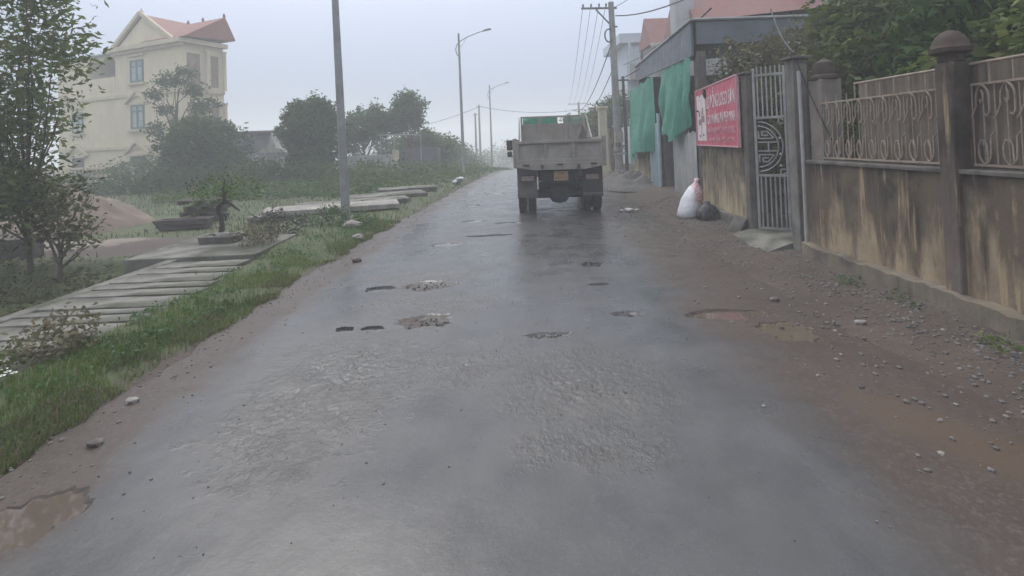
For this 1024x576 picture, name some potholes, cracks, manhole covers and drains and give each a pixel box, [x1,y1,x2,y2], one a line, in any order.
pothole [393,313,453,330]
pothole [0,485,96,553]
pothole [397,280,462,292]
pothole [683,309,779,320]
